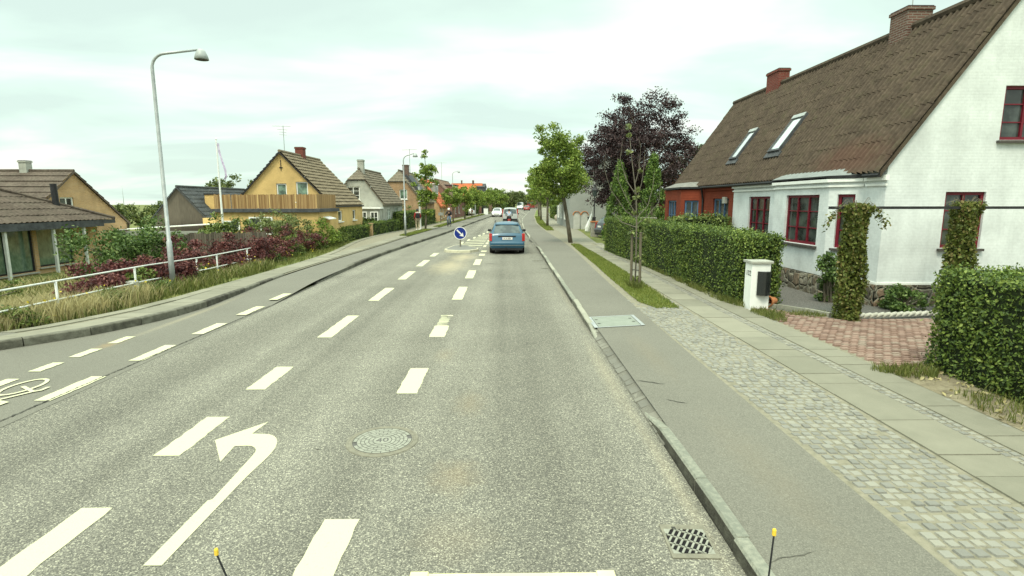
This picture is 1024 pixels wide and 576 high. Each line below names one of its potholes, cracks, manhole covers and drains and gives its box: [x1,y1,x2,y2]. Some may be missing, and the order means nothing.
utility cover [589,315,645,328]
manhole cover [345,426,418,457]
drain grate [659,524,721,559]
